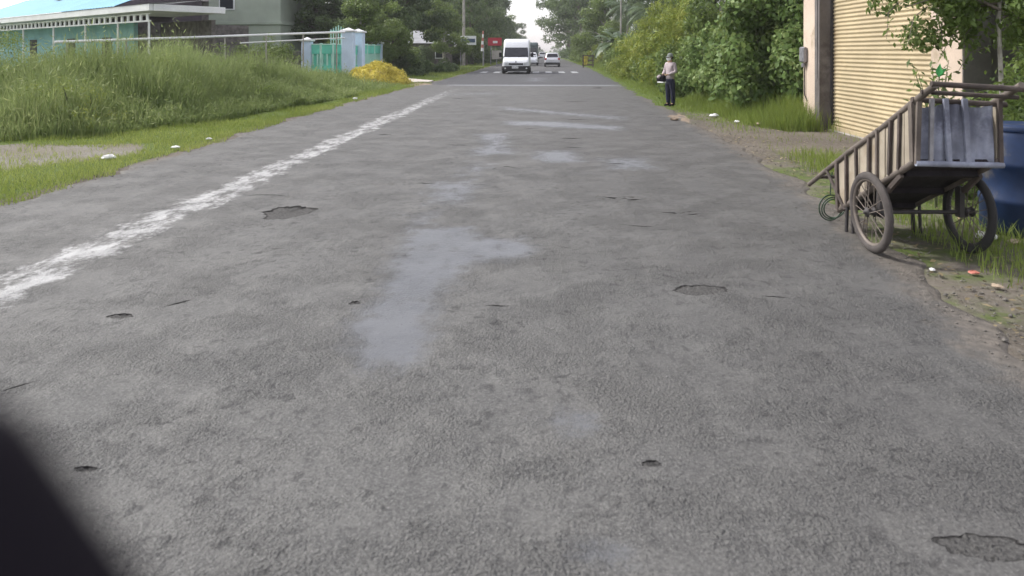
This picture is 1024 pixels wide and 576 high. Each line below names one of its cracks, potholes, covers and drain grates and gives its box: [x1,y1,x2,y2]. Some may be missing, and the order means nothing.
pothole [248,203,326,223]
pothole [904,514,1024,576]
pothole [658,280,743,301]
